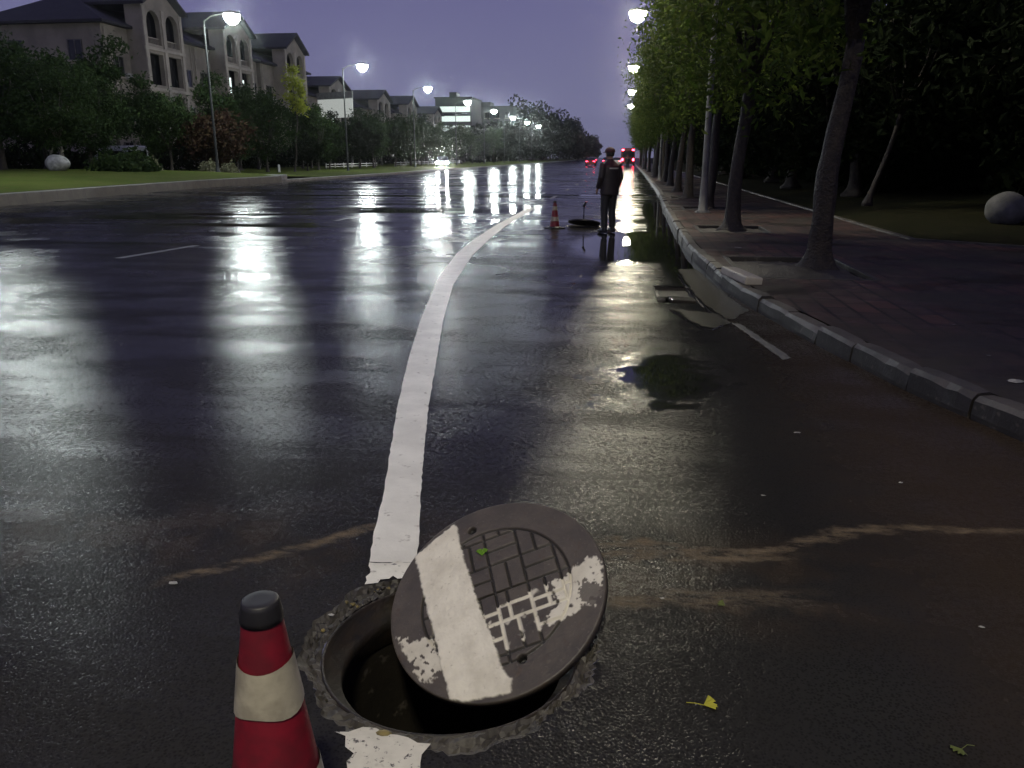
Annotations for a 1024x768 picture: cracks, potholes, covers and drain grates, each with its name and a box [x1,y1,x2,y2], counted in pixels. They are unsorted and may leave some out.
manhole cover [391,503,608,708]
manhole cover [296,578,601,756]
drain grate [654,286,705,329]
